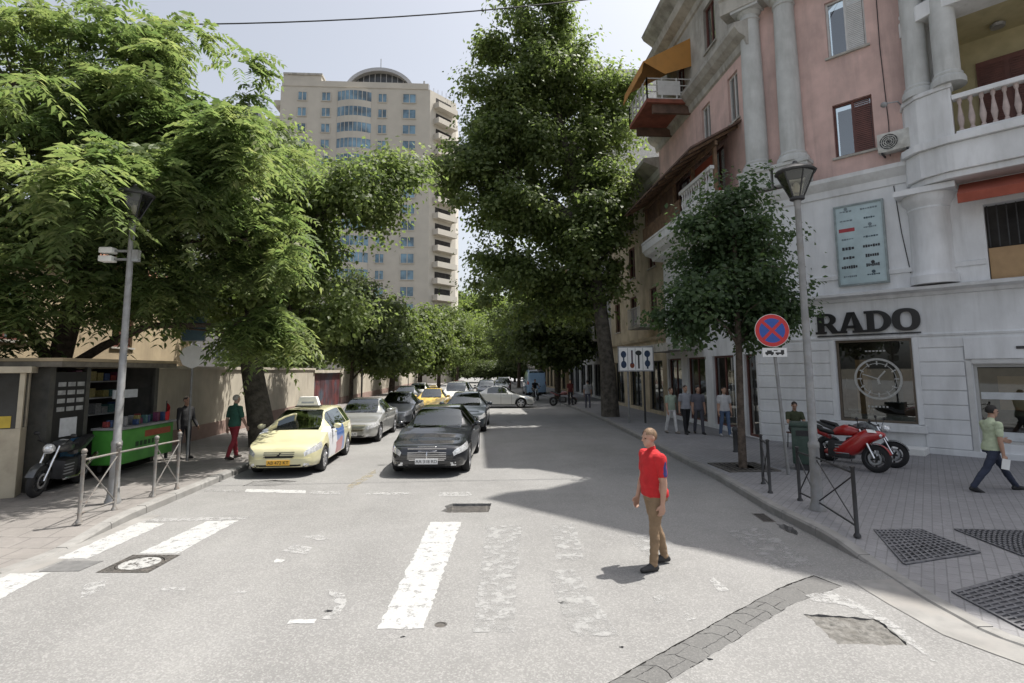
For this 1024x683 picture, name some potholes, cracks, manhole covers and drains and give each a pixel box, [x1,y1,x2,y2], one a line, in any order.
drain grate [954,528,1024,556]
drain grate [951,571,1024,630]
manhole cover [96,555,180,573]
manhole cover [442,503,492,513]
manhole cover [39,560,103,572]
drain grate [874,528,981,565]
